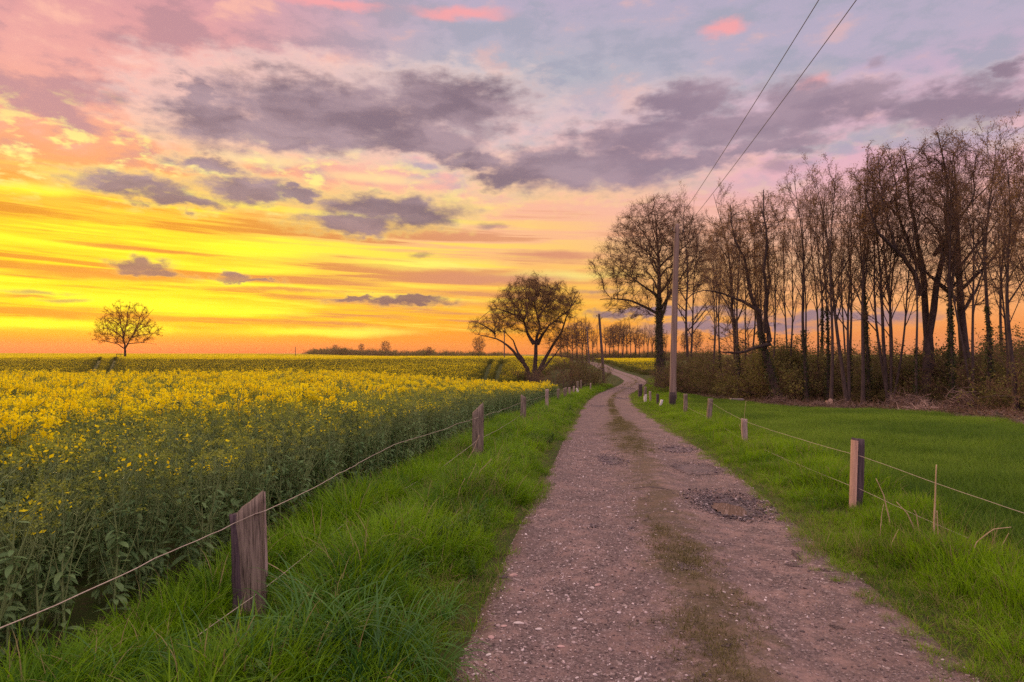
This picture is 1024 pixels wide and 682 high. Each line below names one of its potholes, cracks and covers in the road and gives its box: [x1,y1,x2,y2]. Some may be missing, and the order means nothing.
pothole [670,461,726,476]
pothole [679,488,783,524]
